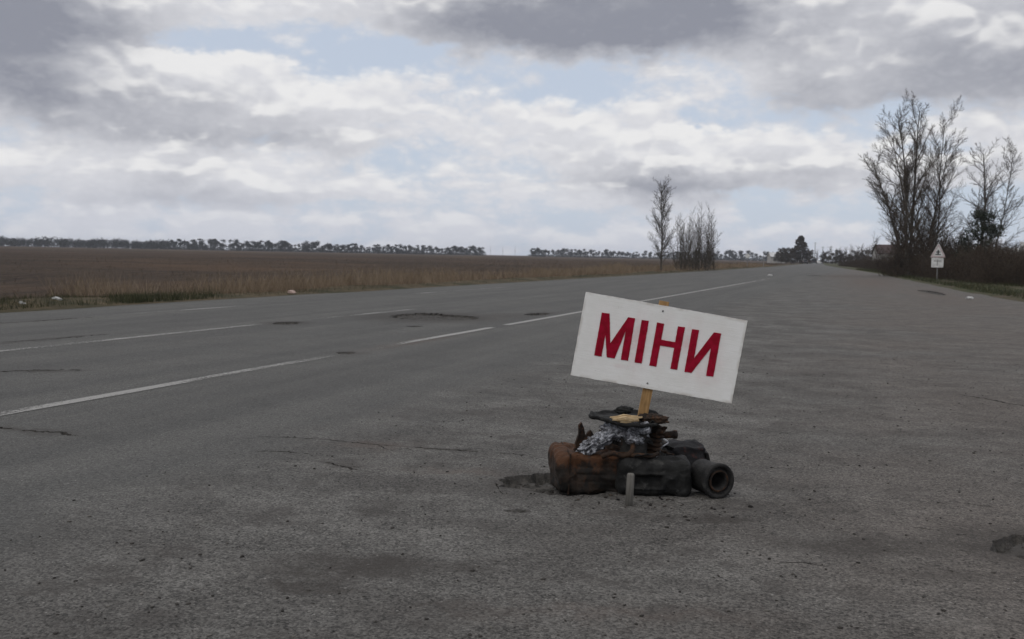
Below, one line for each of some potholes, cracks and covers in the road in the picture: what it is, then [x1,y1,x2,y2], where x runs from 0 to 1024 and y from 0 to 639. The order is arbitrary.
crack [0,427,76,436]
pothole [391,313,479,321]
crack [257,436,524,470]
pothole [990,534,1024,559]
pothole [499,473,607,496]
